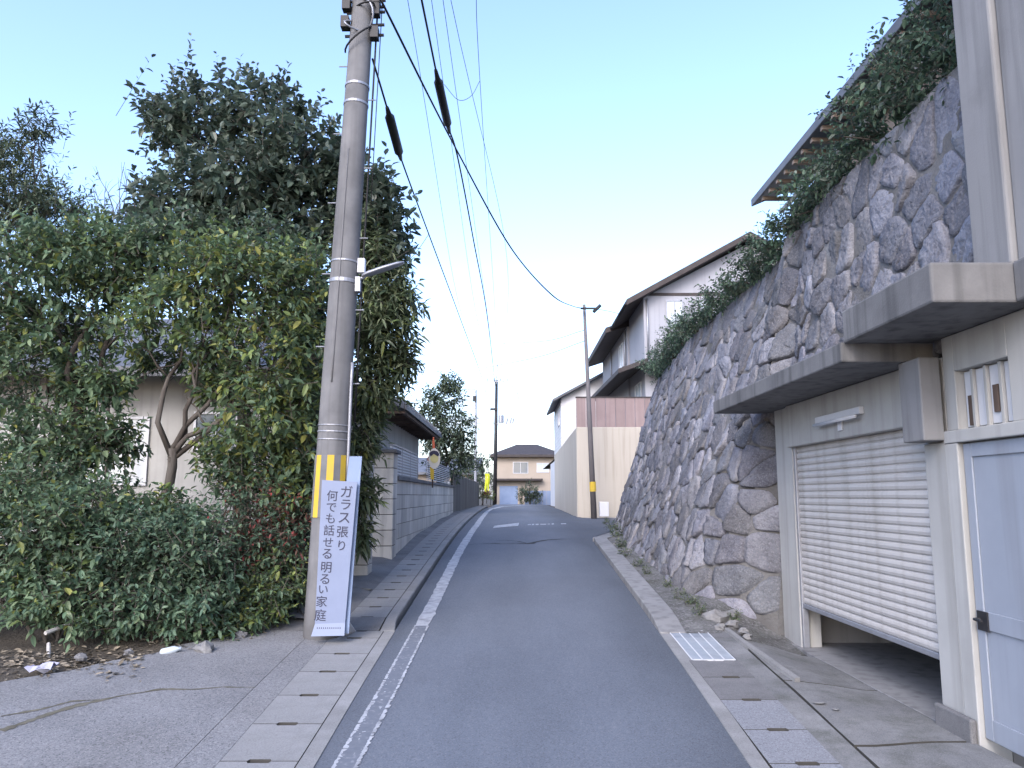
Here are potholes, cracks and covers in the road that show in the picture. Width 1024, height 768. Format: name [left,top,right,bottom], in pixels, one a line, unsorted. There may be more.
crack [0,686,242,731]
drain grate [670,630,736,661]
